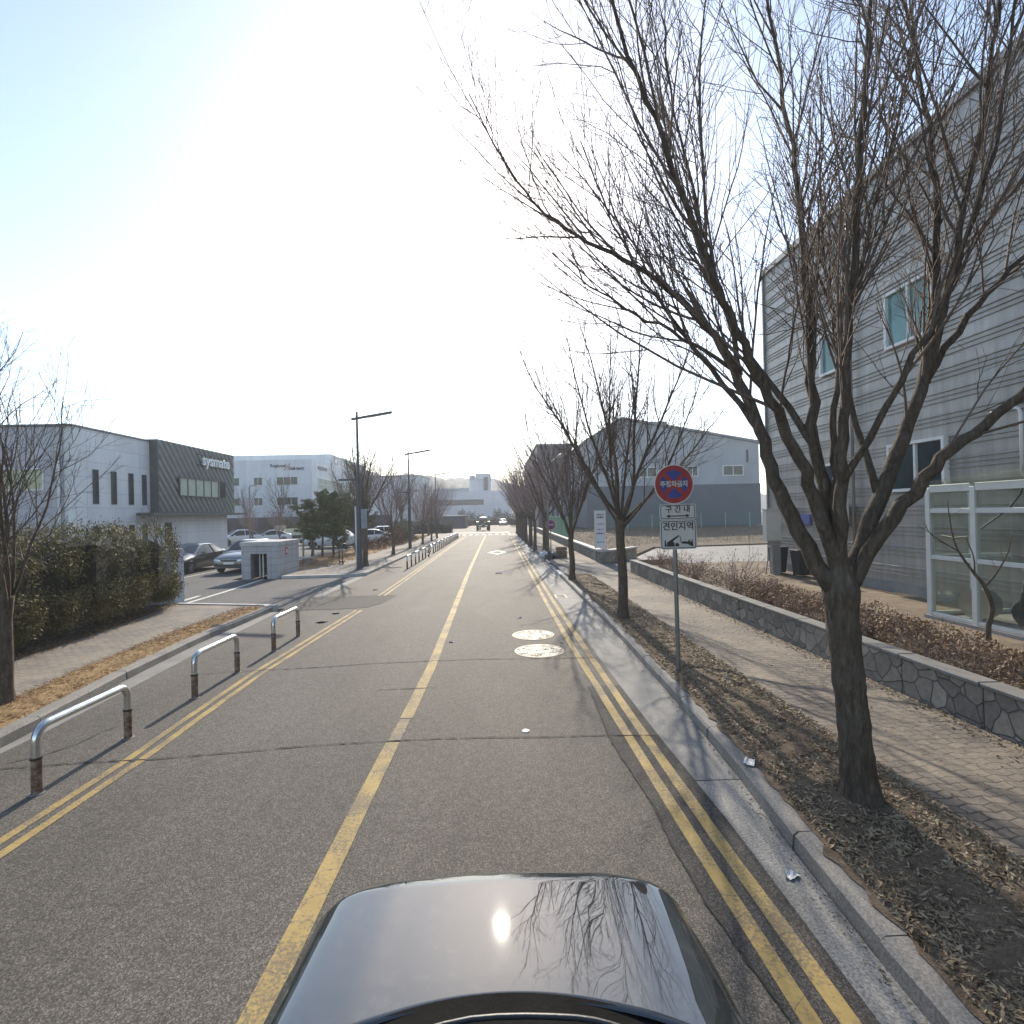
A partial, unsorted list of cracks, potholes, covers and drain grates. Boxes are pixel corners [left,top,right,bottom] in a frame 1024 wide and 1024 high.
manhole cover [512,630,554,640]
manhole cover [515,644,564,658]
